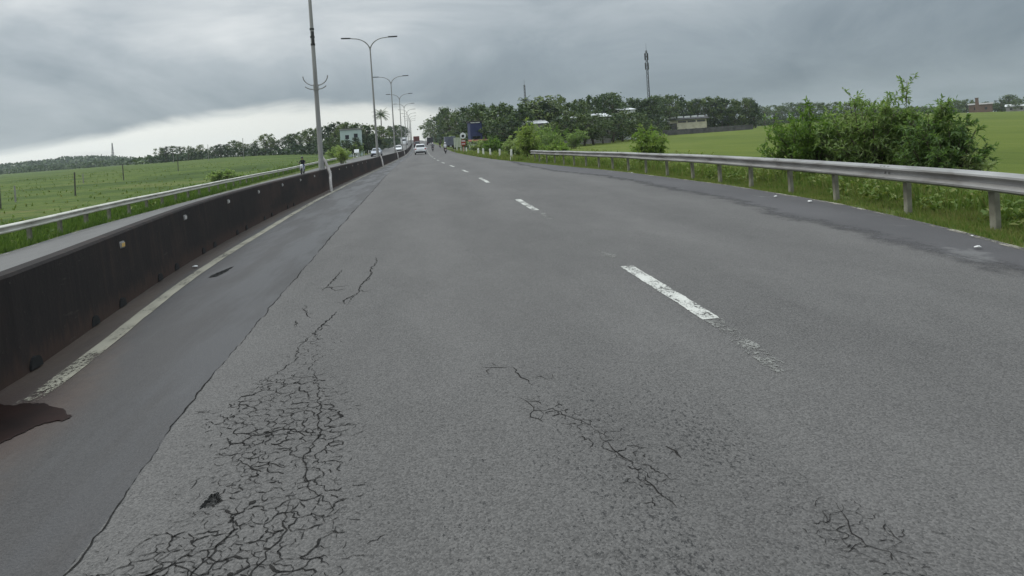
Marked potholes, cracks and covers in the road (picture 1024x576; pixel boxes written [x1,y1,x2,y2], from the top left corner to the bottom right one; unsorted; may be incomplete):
crack [519,396,687,510]
crack [294,258,377,332]
pothole [200,492,223,509]
crack [789,476,942,576]
